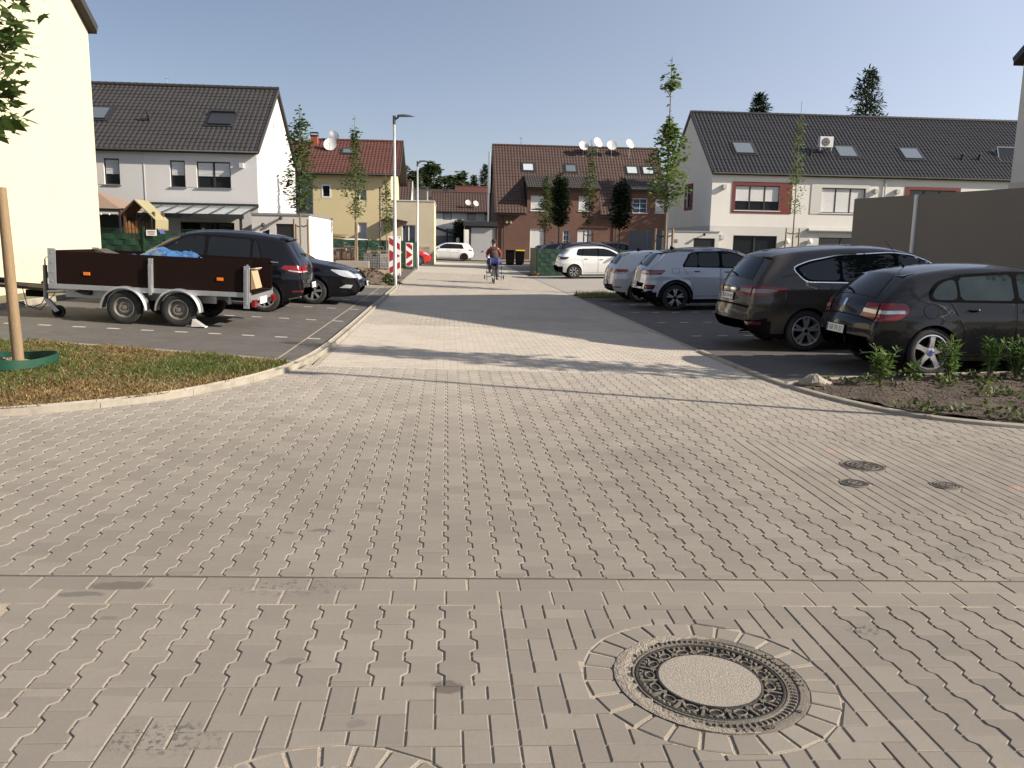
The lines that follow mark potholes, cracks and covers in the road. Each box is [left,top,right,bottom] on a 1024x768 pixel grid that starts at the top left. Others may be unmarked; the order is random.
utility cover [839,479,870,488]
utility cover [929,481,962,490]
utility cover [839,460,887,472]
manhole cover [613,635,810,737]
